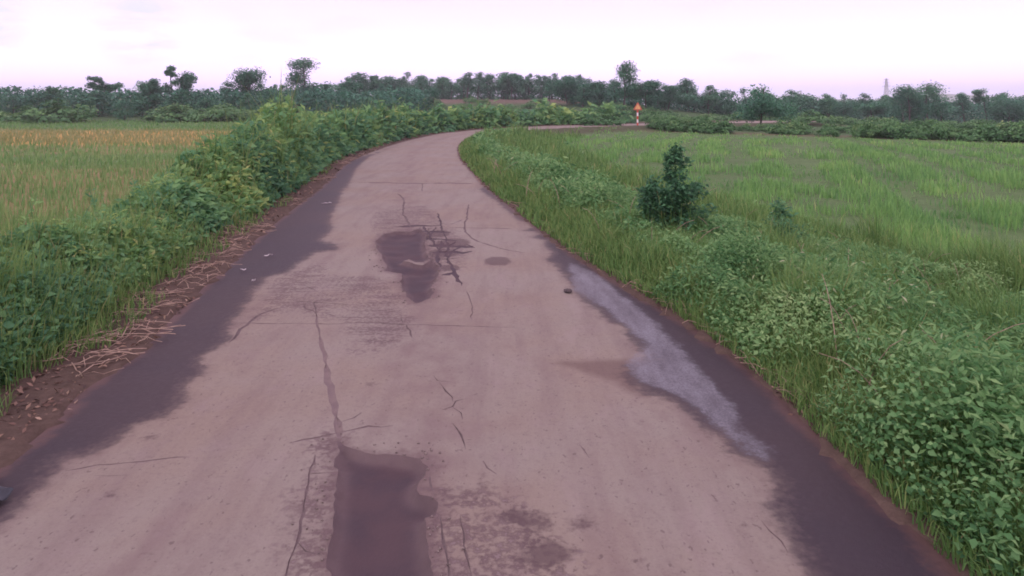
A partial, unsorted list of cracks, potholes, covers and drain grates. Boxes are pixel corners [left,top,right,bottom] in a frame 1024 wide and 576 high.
crack [435,378,467,449]
pothole [326,440,438,576]
crack [230,285,393,576]
pothole [375,229,441,304]
crack [397,193,524,319]
